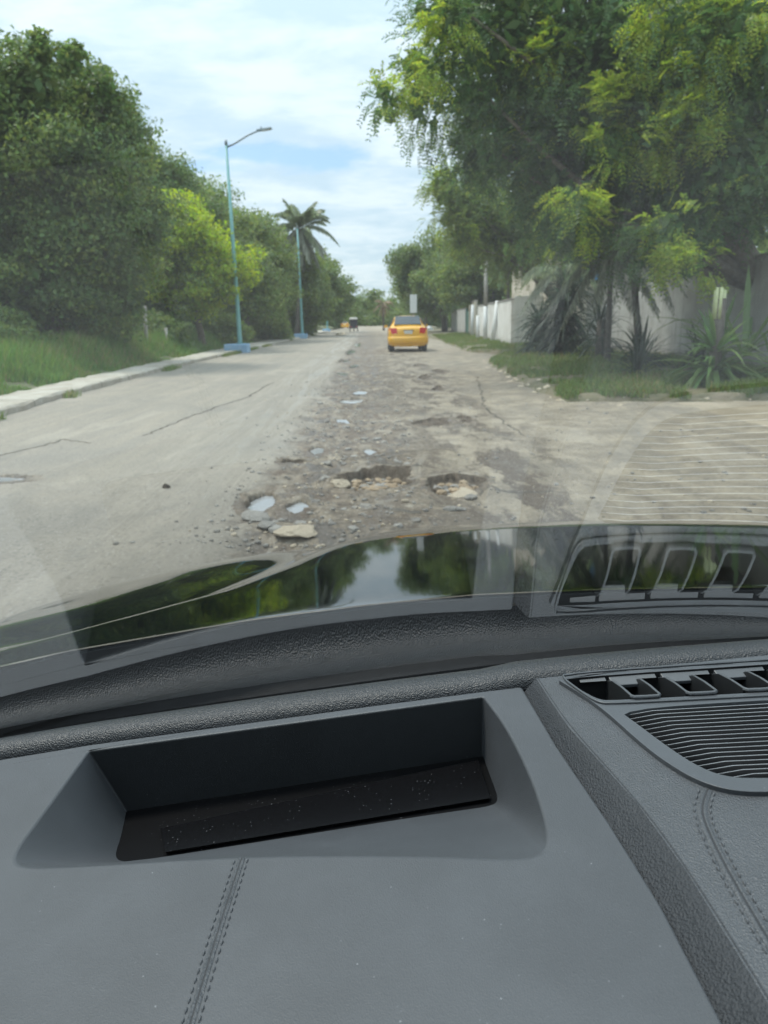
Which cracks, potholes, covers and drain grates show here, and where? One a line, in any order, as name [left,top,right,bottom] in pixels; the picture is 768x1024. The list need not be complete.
pothole [323,463,421,497]
pothole [274,457,316,465]
pothole [357,444,386,460]
pothole [334,396,370,405]
pothole [417,472,497,501]
pothole [231,484,287,517]
pothole [330,414,358,429]
pothole [275,493,322,521]
pothole [0,474,47,484]
pothole [302,442,331,459]
crack [0,439,87,456]
crack [142,382,274,436]
